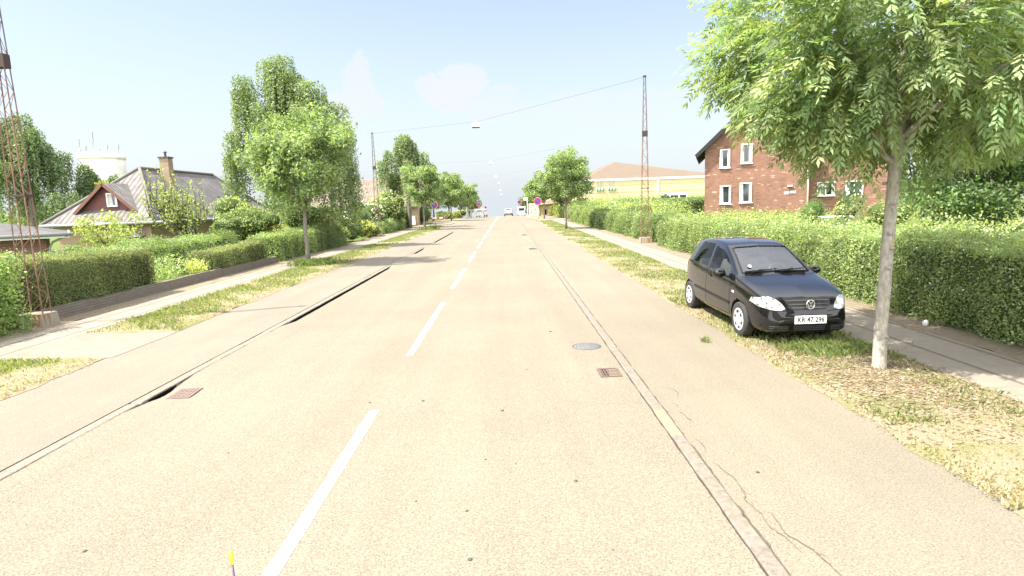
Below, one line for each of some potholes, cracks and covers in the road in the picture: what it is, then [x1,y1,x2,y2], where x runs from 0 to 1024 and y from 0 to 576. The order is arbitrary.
drain grate [596,368,623,378]
drain grate [166,387,203,399]
crack [698,440,842,576]
